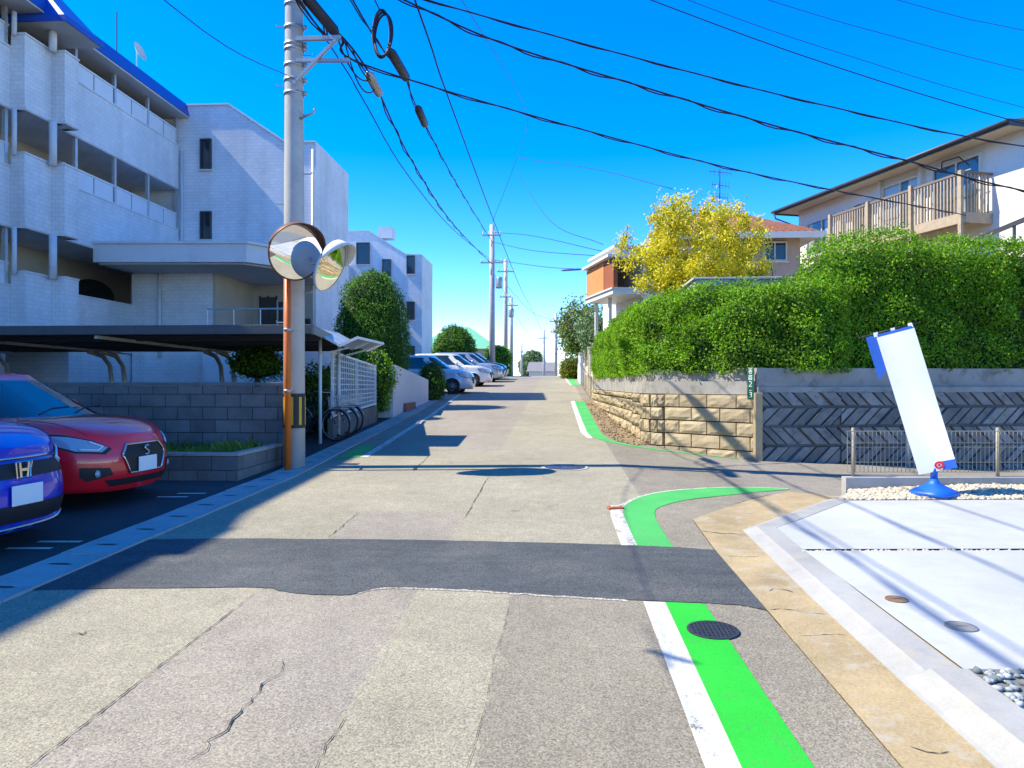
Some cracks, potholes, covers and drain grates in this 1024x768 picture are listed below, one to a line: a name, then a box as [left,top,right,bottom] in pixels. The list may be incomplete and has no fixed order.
crack [193,660,284,758]
crack [28,594,253,767]
manhole cover [944,621,979,632]
manhole cover [885,595,909,603]
manhole cover [687,620,739,640]
